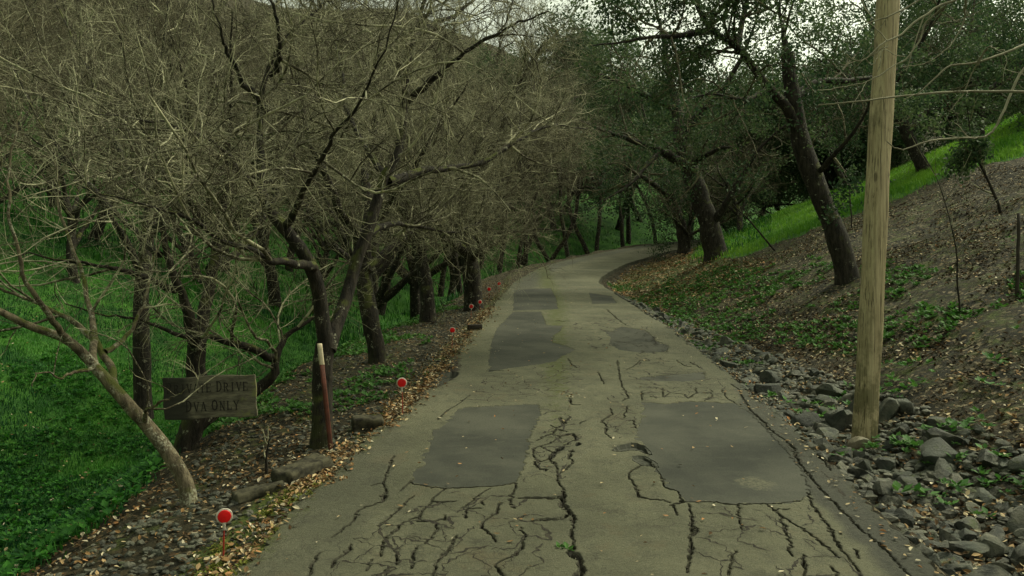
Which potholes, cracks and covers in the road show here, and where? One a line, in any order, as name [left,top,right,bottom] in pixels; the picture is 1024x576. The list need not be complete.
crack [308,309,911,576]
